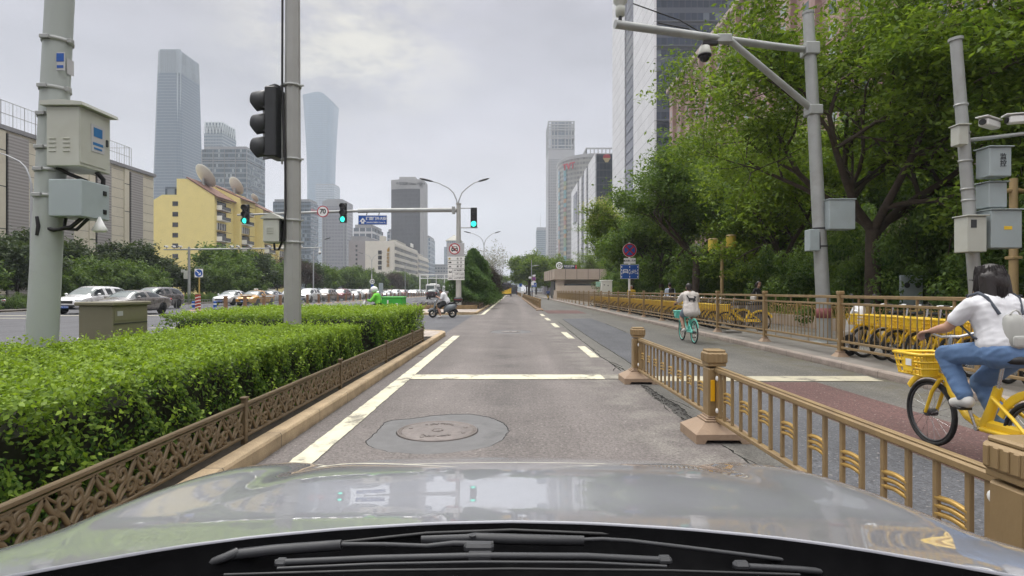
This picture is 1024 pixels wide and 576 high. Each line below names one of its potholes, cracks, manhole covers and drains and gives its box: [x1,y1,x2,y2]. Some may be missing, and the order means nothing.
manhole cover [365,414,509,454]
crack [641,385,692,421]
